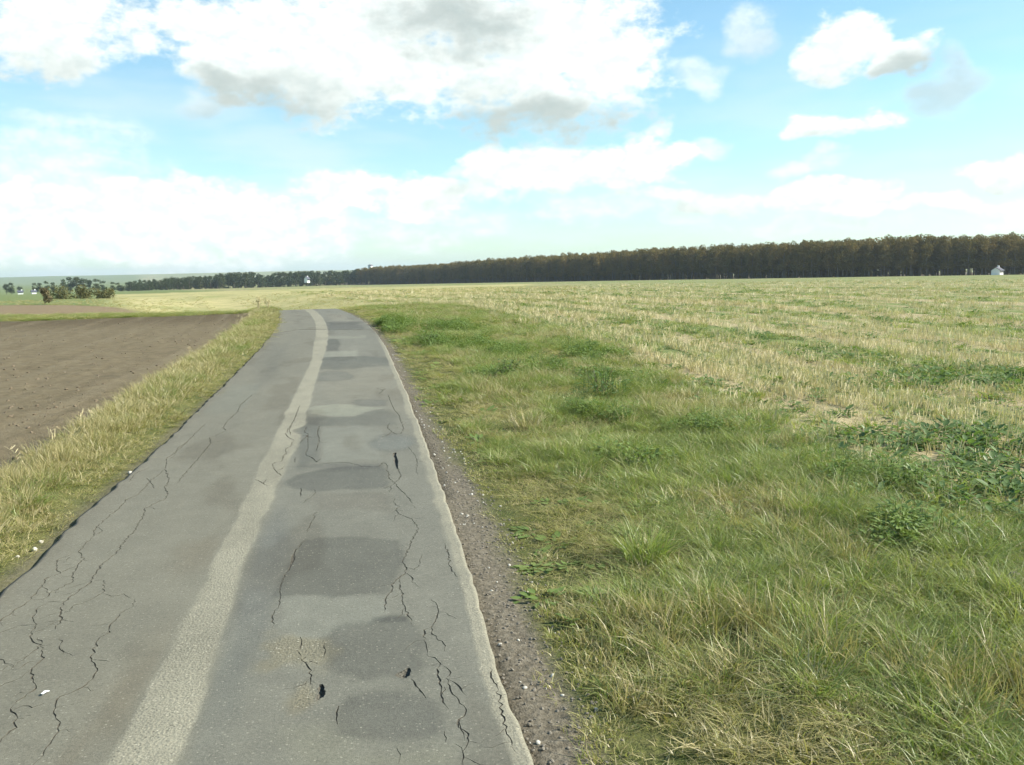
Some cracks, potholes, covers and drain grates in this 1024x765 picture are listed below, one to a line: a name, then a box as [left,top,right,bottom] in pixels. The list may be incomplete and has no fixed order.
pothole [315,684,326,701]
crack [0,395,252,763]
pothole [395,667,411,678]
crack [259,388,515,765]
